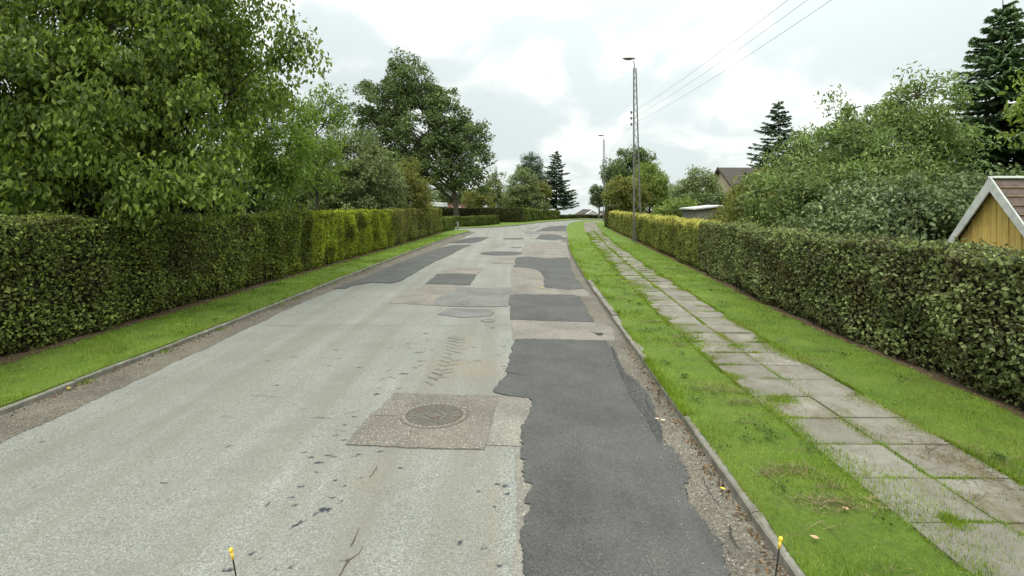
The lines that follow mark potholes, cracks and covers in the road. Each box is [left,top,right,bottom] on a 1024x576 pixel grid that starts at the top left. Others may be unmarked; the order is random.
crack [339,466,377,576]
manhole cover [400,403,468,429]
